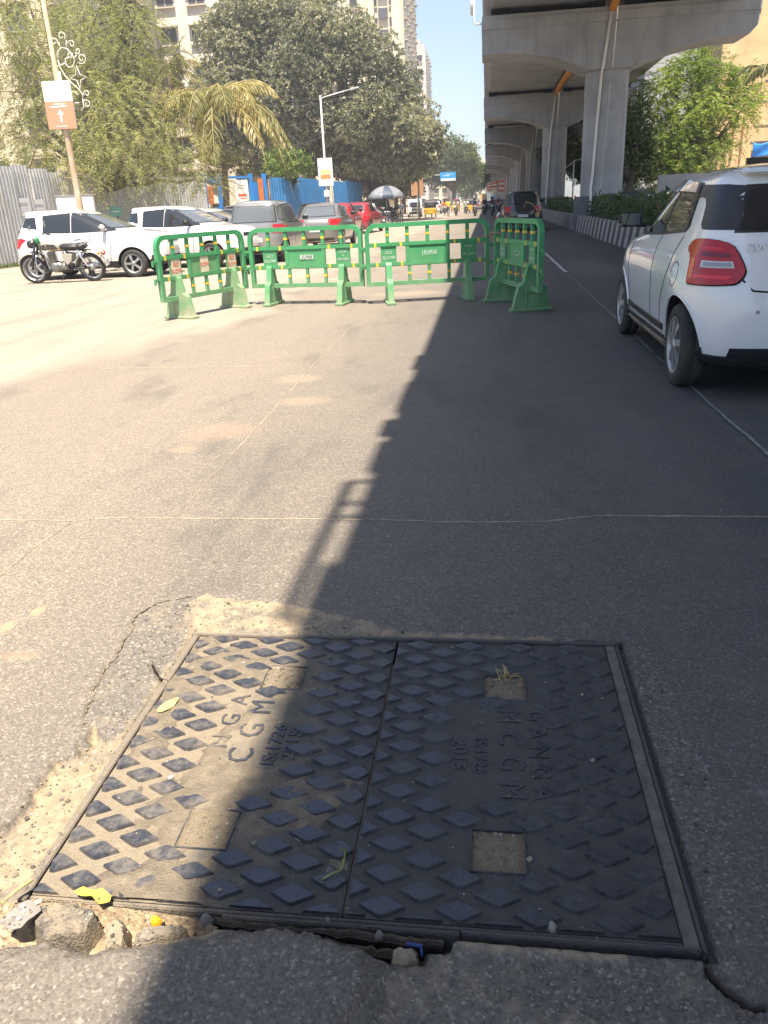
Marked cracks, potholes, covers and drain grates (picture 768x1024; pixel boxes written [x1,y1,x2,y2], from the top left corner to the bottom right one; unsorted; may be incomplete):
pothole [0,903,218,955]
crack [82,595,194,725]
manhole cover [17,632,716,966]
